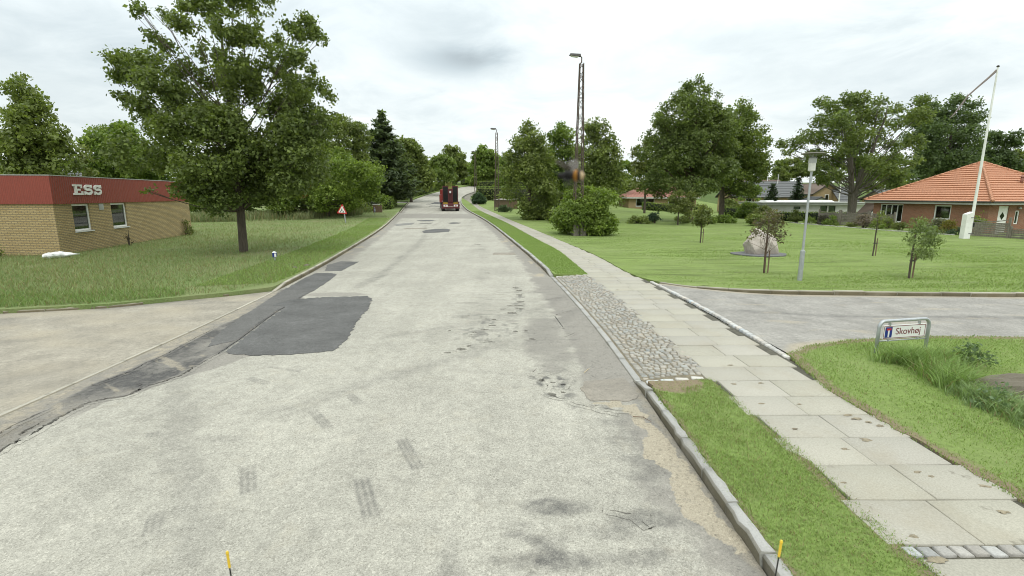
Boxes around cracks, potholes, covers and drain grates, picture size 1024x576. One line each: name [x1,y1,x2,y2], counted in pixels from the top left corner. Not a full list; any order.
pothole [540,390,571,401]
crack [527,368,632,416]
crack [546,297,579,337]
